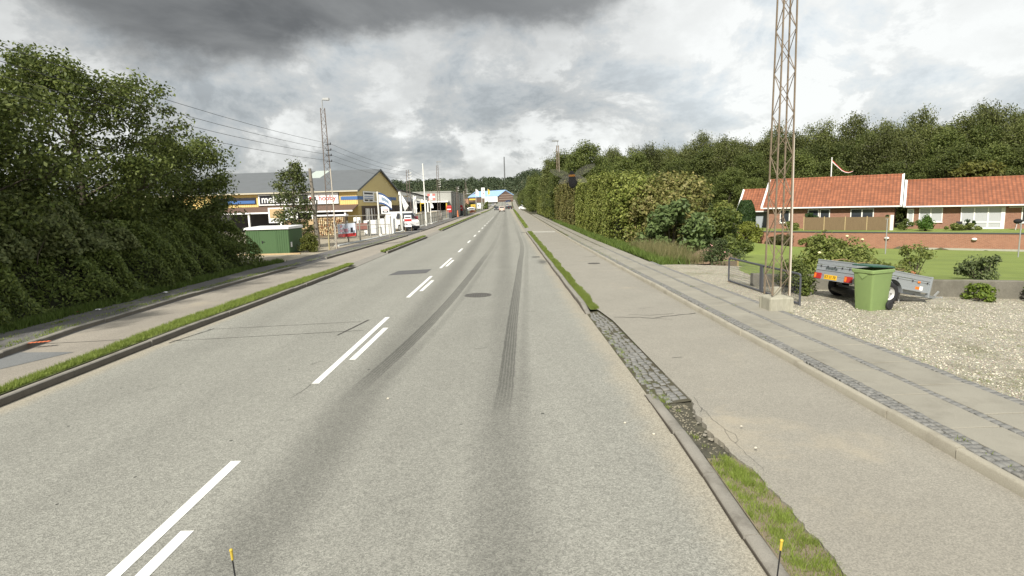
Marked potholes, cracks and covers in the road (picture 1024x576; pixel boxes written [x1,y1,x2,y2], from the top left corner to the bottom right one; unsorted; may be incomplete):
crack [169,320,368,343]
